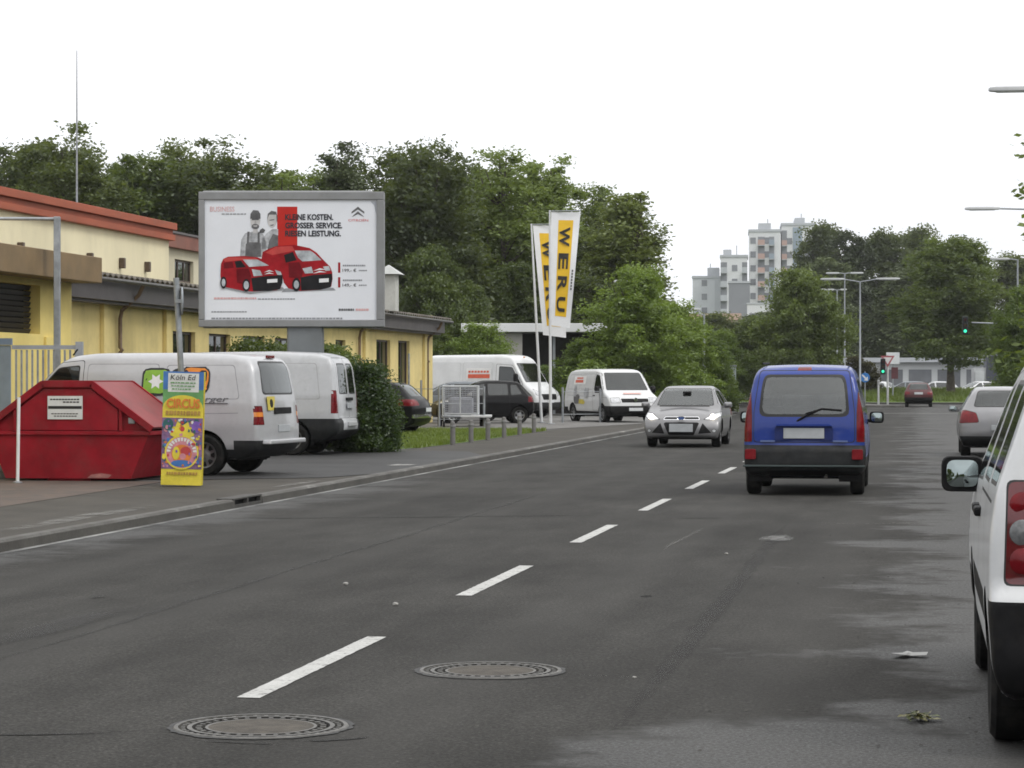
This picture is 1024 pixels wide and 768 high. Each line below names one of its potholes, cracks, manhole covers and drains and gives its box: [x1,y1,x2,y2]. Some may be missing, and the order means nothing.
manhole cover [414,661,566,679]
manhole cover [167,713,354,740]
drain grate [216,494,262,508]
